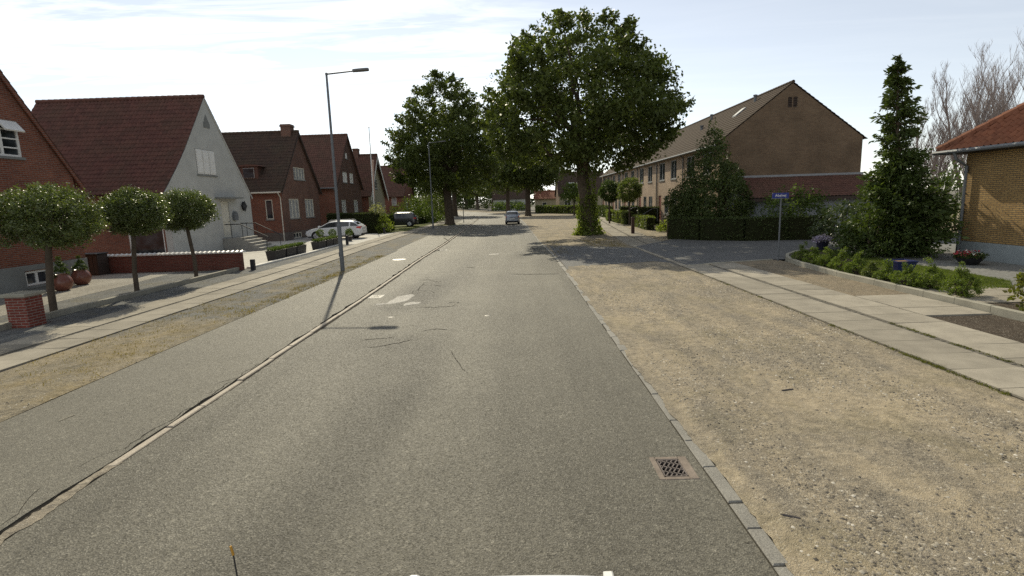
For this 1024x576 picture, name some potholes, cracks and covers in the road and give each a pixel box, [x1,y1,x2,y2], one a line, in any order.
crack [2,487,71,530]
drain grate [649,456,700,480]
crack [79,364,258,467]
